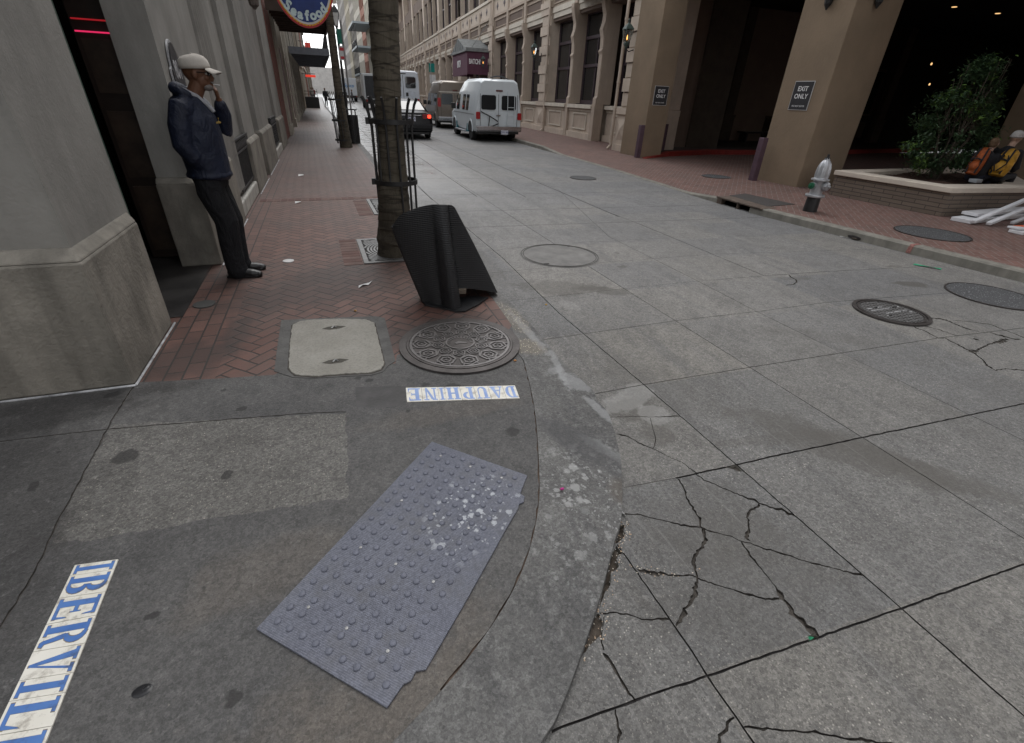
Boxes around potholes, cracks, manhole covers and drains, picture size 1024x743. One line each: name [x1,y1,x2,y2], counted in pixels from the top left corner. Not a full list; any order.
manhole cover [520,244,600,268]
crack [717,717,893,743]
manhole cover [852,299,933,327]
utility cover [274,316,396,378]
crack [915,318,1024,371]
crack [600,415,863,743]
manhole cover [399,318,520,375]
manhole cover [893,225,973,242]
drain grate [717,193,795,214]
manhole cover [944,282,1024,311]
